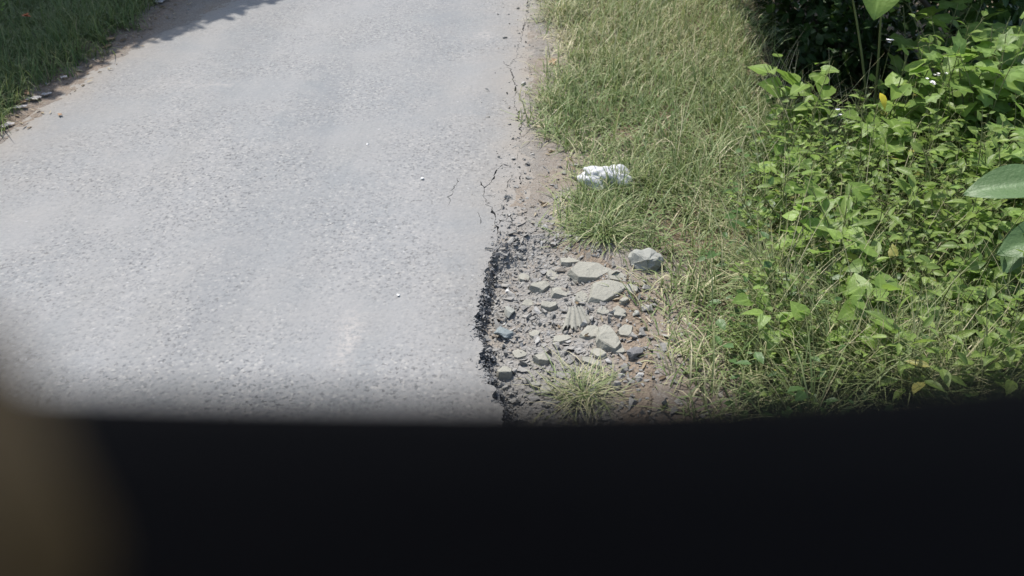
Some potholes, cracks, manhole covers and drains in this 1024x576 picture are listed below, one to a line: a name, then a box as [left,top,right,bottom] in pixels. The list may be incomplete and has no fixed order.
pothole [466,232,656,396]
